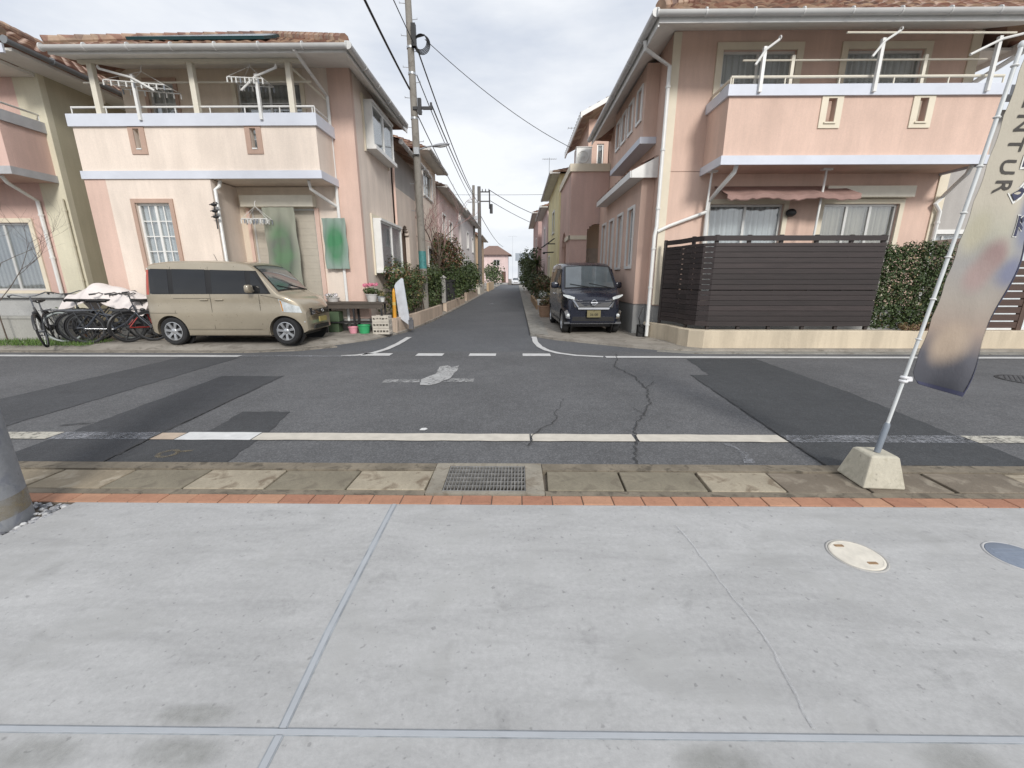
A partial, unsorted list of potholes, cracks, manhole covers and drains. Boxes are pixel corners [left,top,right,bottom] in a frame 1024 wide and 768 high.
manhole cover [825,539,890,573]
crack [614,354,652,464]
crack [677,528,815,729]
drain grate [425,463,545,497]
manhole cover [994,375,1024,383]
manhole cover [981,541,1024,570]
